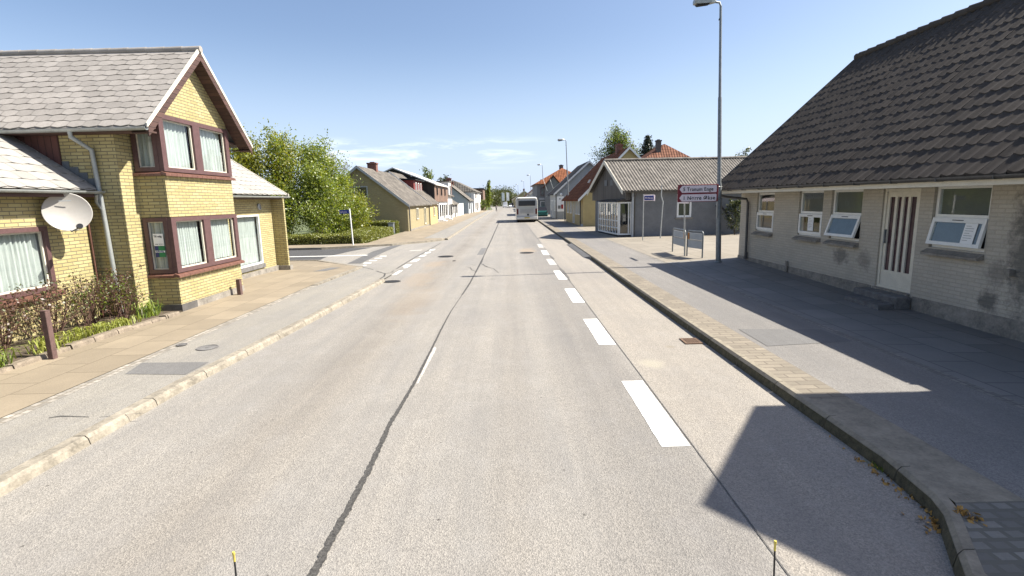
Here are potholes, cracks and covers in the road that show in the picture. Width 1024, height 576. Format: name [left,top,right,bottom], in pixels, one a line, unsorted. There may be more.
crack [307,222,499,576]
